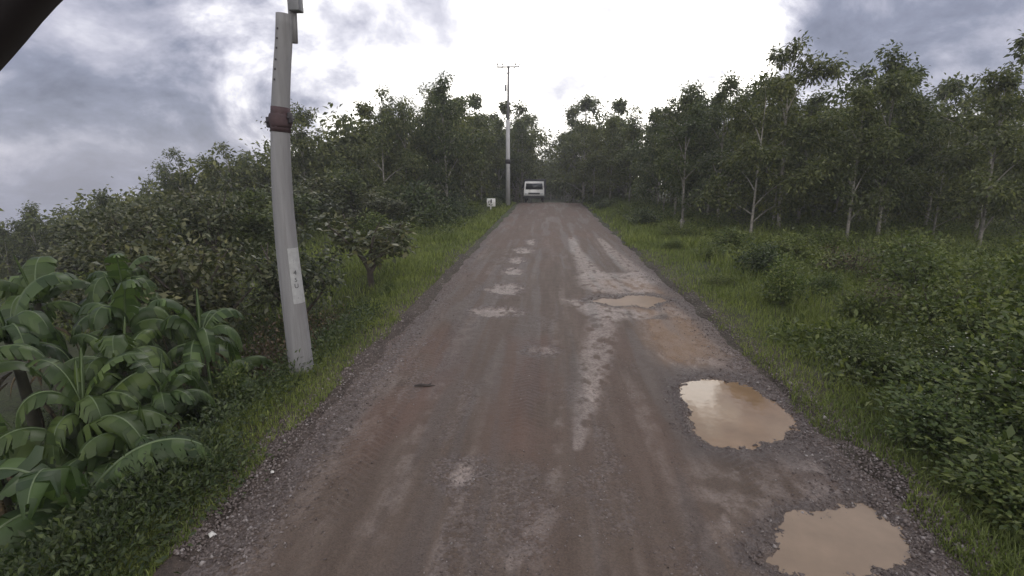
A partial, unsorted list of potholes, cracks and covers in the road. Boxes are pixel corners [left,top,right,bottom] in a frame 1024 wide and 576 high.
pothole [735,493,942,576]
pothole [643,314,714,363]
pothole [667,372,809,452]
pothole [467,306,526,318]
pothole [581,293,679,309]
pothole [484,282,526,295]
